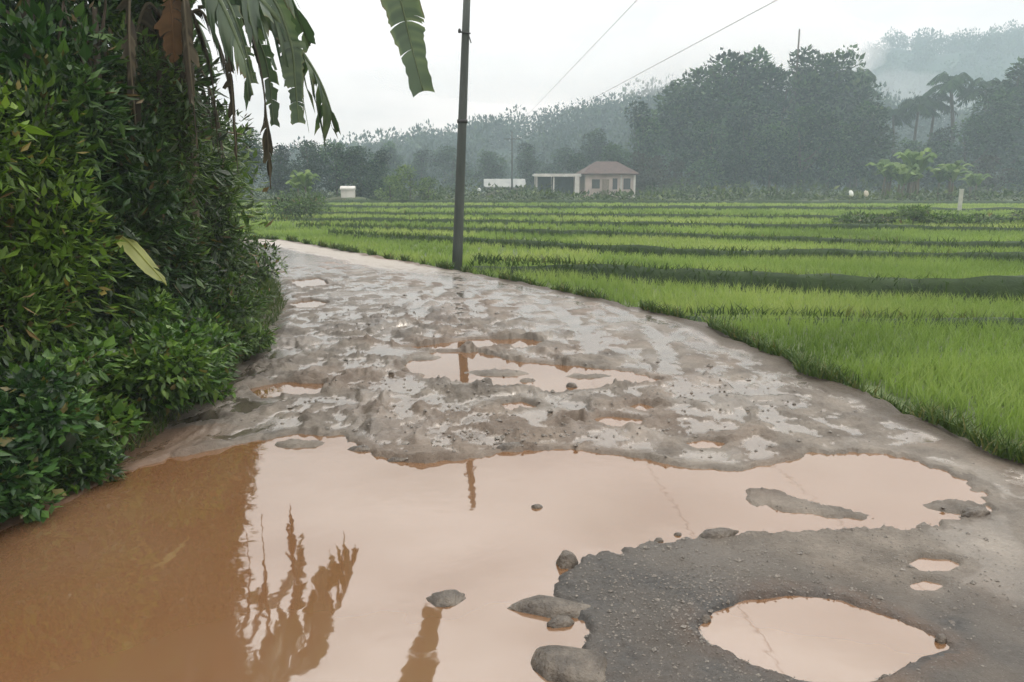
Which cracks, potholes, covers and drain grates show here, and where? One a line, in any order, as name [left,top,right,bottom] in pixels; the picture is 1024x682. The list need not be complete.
pothole [399,342,665,393]
pothole [400,328,555,350]
pothole [0,426,1003,682]
